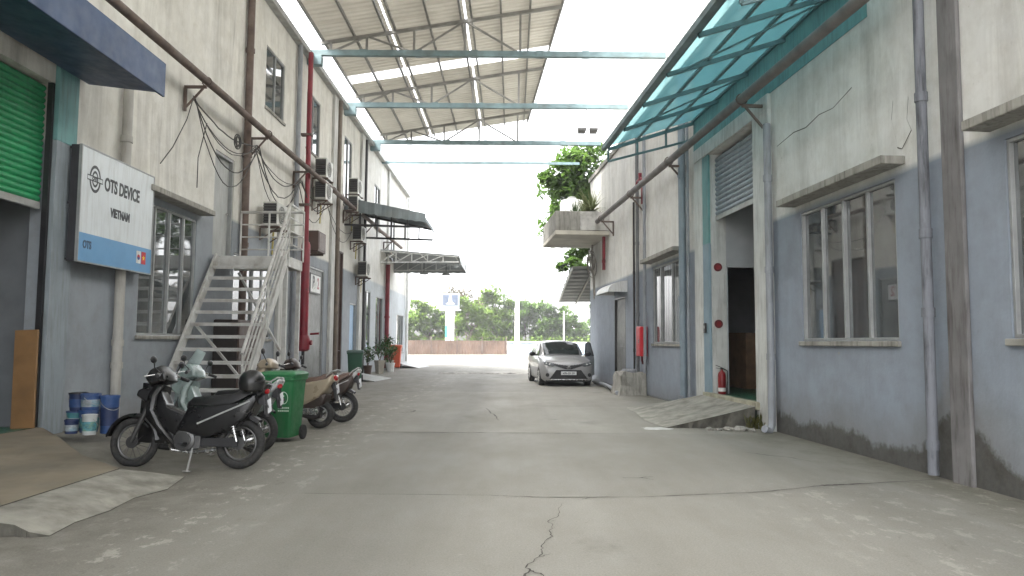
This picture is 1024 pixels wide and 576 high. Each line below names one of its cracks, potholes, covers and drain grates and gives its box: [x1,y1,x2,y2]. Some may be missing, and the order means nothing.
crack [523,506,561,576]
